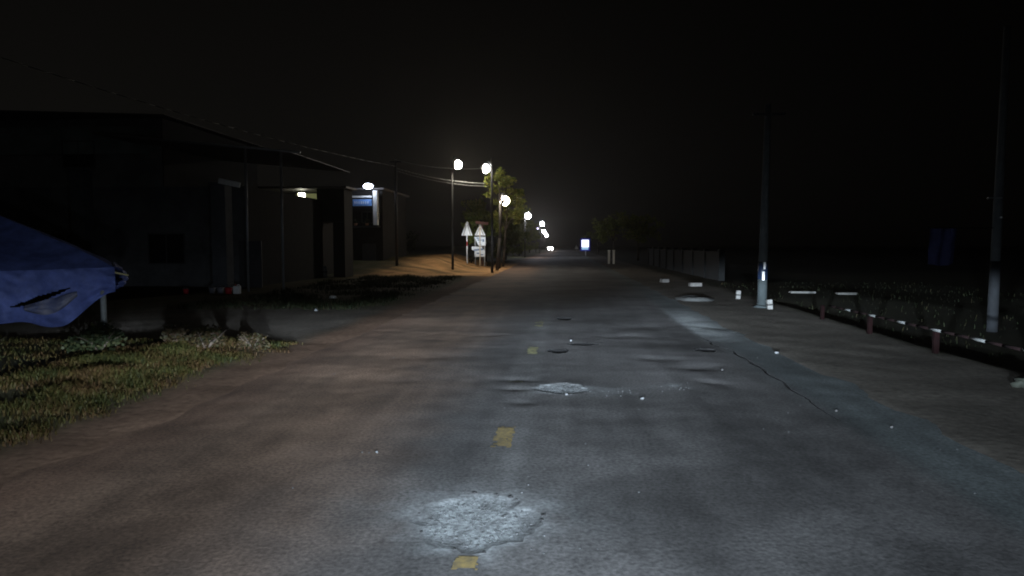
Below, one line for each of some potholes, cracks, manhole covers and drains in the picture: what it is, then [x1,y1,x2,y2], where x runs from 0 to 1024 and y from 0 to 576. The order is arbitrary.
crack [706,339,837,419]
